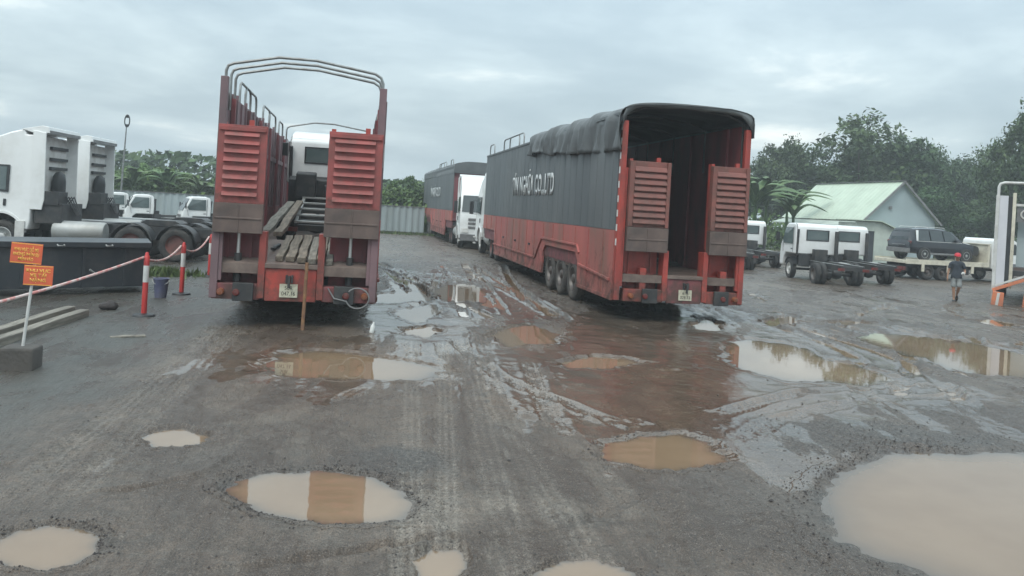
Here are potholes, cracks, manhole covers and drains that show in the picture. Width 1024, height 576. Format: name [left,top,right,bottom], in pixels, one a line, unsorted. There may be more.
pothole [399,539,478,576]
pothole [787,440,1024,576]
pothole [582,428,748,475]
pothole [123,422,224,450]
pothole [843,328,1024,379]
pothole [201,464,442,529]
pothole [0,517,117,574]
pothole [516,552,654,576]
pothole [711,335,920,391]
pothole [248,346,465,383]
pothole [480,322,573,349]
pothole [545,353,659,370]
